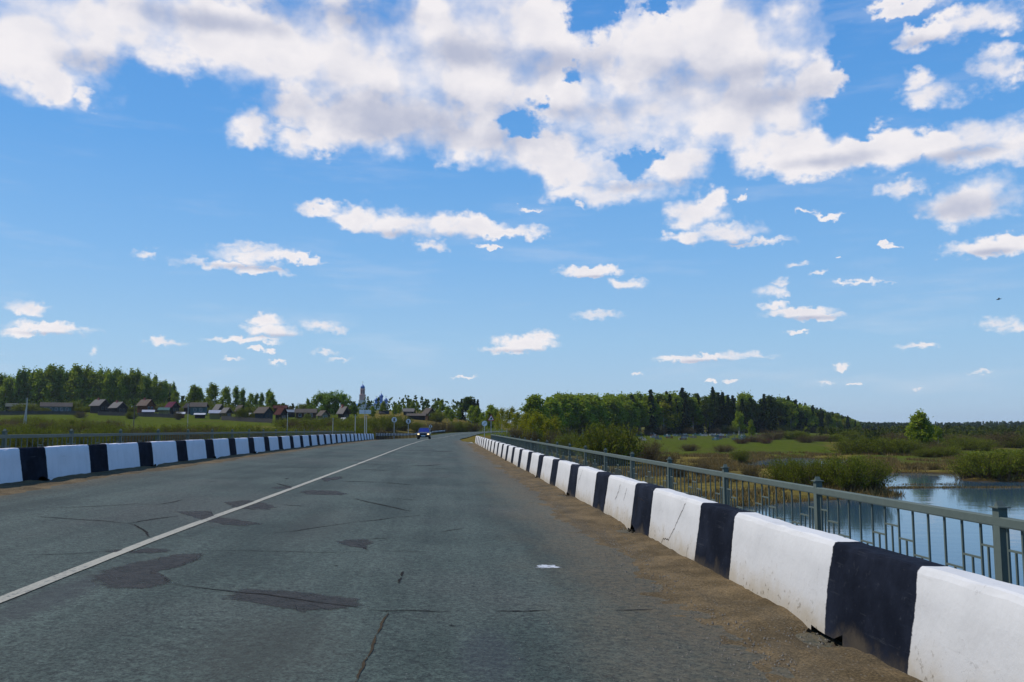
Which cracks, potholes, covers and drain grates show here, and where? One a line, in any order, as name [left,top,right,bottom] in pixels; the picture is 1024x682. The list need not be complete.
crack [276,464,419,533]
crack [174,583,649,682]
crack [40,499,183,537]
